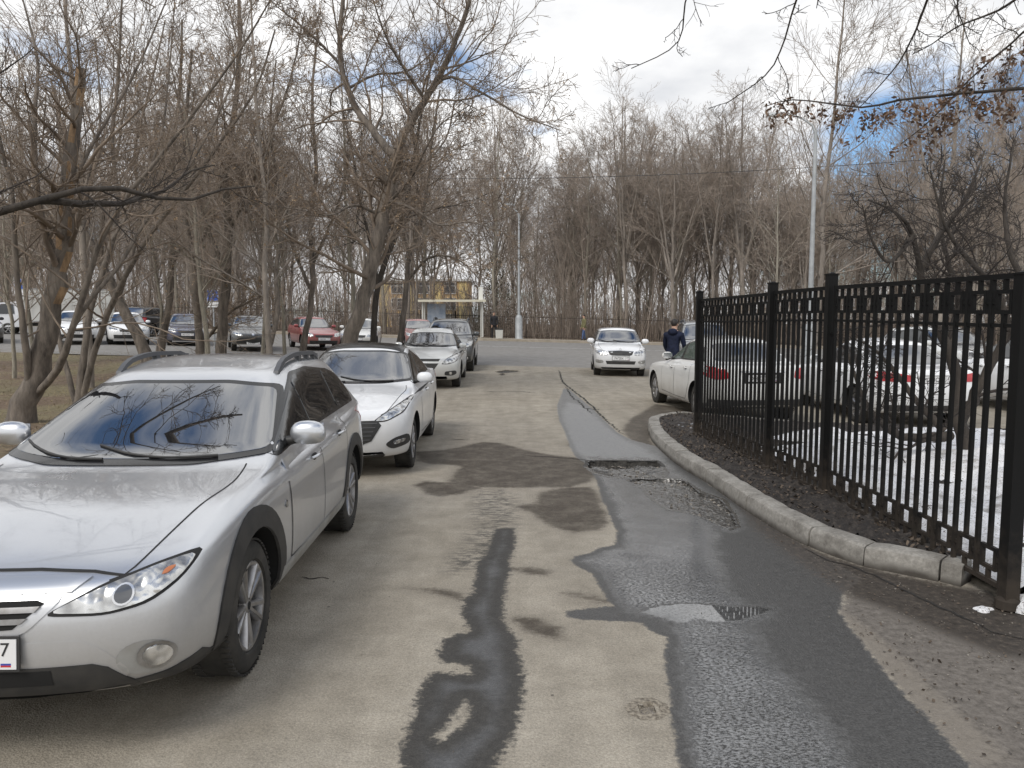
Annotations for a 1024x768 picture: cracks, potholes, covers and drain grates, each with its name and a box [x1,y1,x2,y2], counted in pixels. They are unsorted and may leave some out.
crack [558,370,623,434]
pothole [627,477,741,530]
pothole [583,460,670,480]
